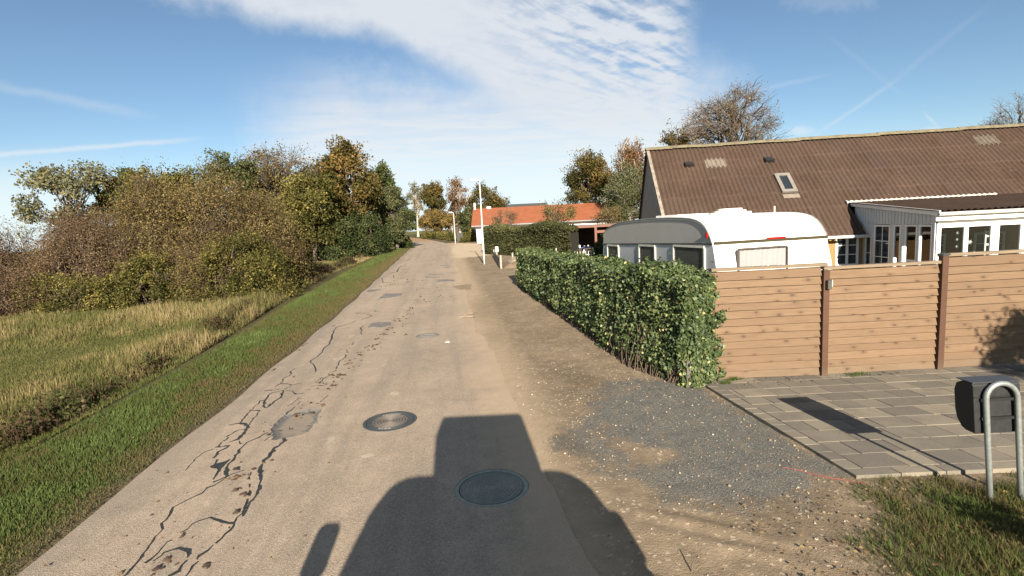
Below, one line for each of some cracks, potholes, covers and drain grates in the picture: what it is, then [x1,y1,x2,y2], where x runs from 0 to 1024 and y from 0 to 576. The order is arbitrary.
manhole cover [363,411,417,432]
pothole [270,408,322,440]
manhole cover [454,470,529,507]
crack [124,311,376,576]
